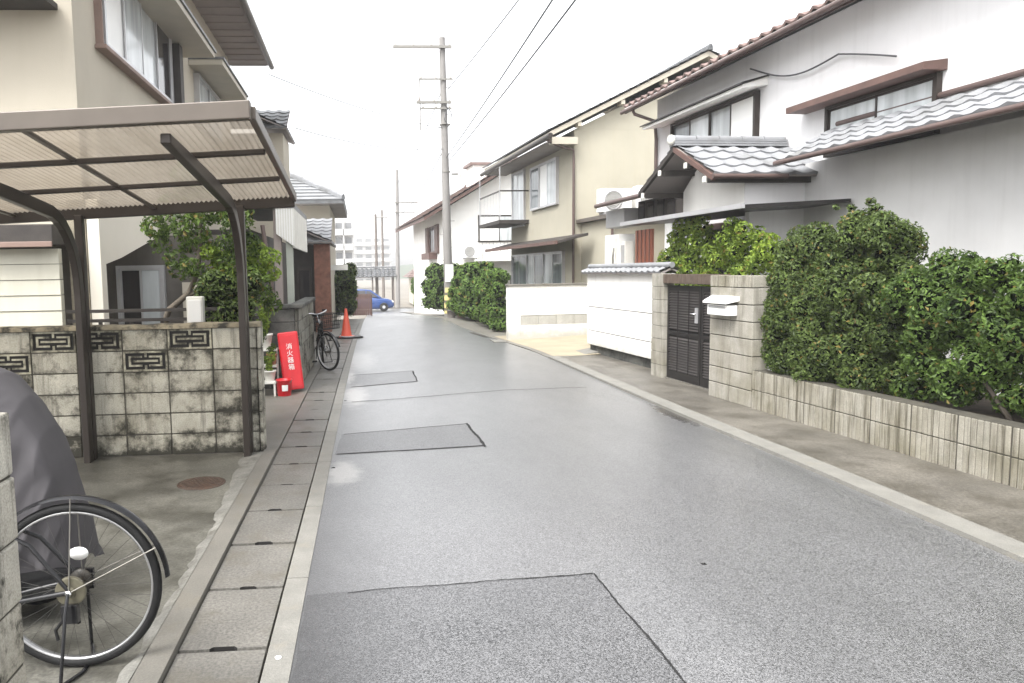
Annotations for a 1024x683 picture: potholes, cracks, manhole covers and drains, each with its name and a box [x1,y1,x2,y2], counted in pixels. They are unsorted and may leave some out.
manhole cover [177,476,226,490]
